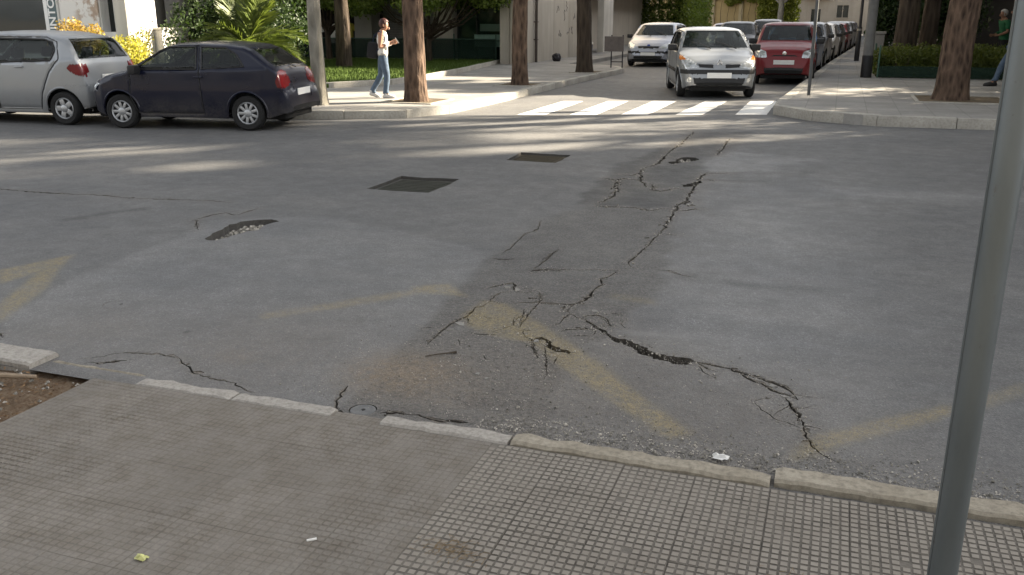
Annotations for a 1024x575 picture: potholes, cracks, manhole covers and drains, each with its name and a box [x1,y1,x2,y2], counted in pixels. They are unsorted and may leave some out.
crack [382,410,468,424]
crack [427,131,836,462]
pothole [205,219,279,240]
crack [82,352,254,393]
manhole cover [349,404,377,415]
